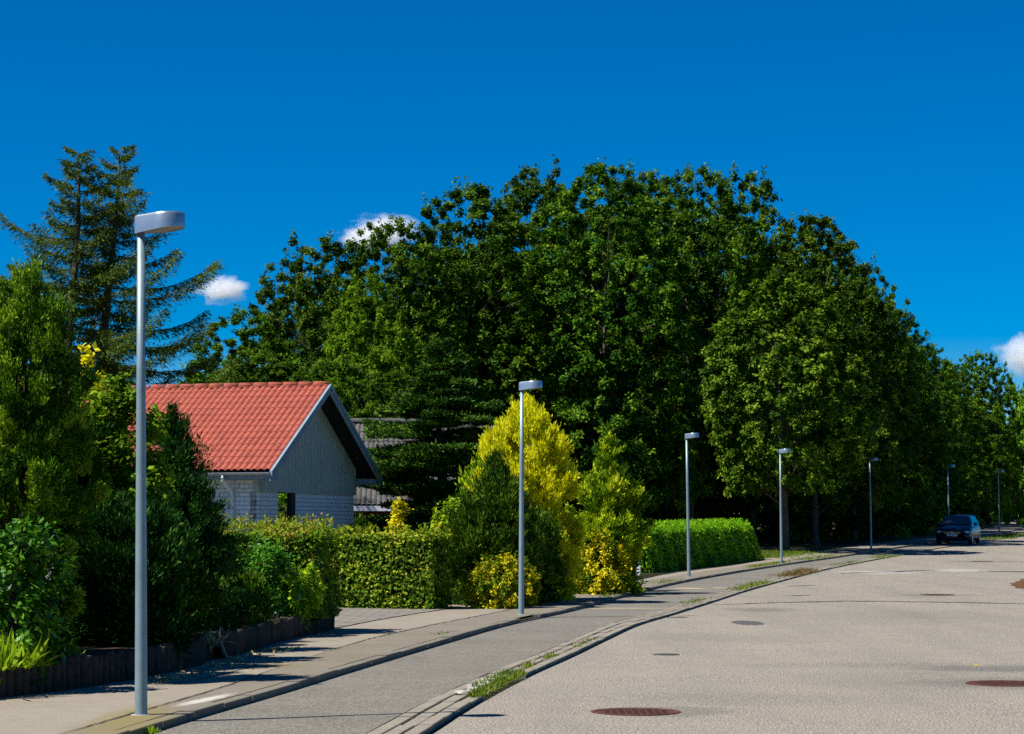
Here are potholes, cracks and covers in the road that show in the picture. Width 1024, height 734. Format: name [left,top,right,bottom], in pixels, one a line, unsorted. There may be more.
manhole cover [591,708,681,716]
